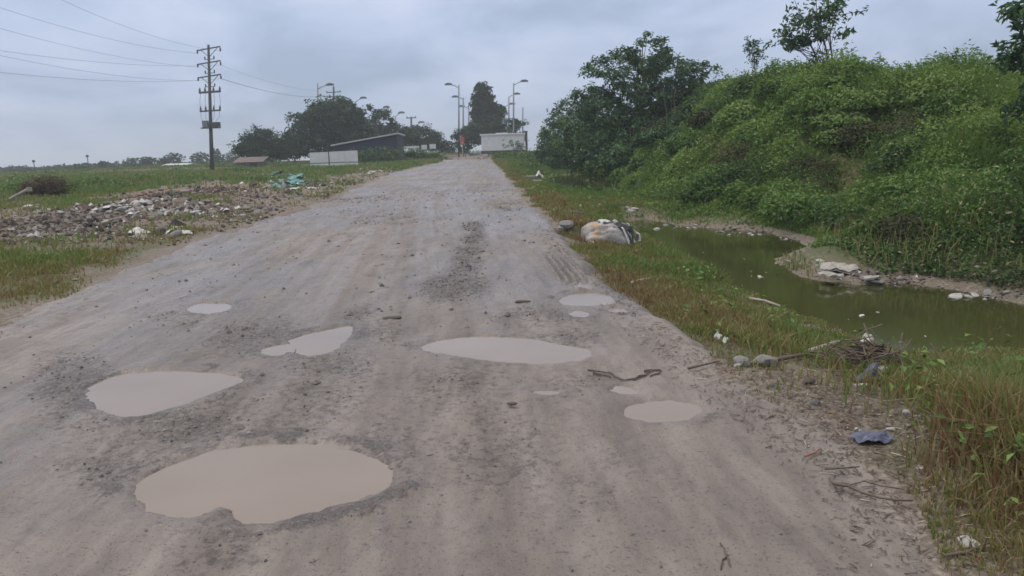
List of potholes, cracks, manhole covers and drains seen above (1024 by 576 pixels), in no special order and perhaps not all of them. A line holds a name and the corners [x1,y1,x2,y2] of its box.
pothole [246,339,295,360]
pothole [555,306,603,319]
pothole [272,320,369,359]
pothole [404,330,612,367]
pothole [546,288,628,307]
pothole [102,430,424,534]
pothole [599,389,726,428]
pothole [62,362,263,422]
pothole [173,298,245,316]
